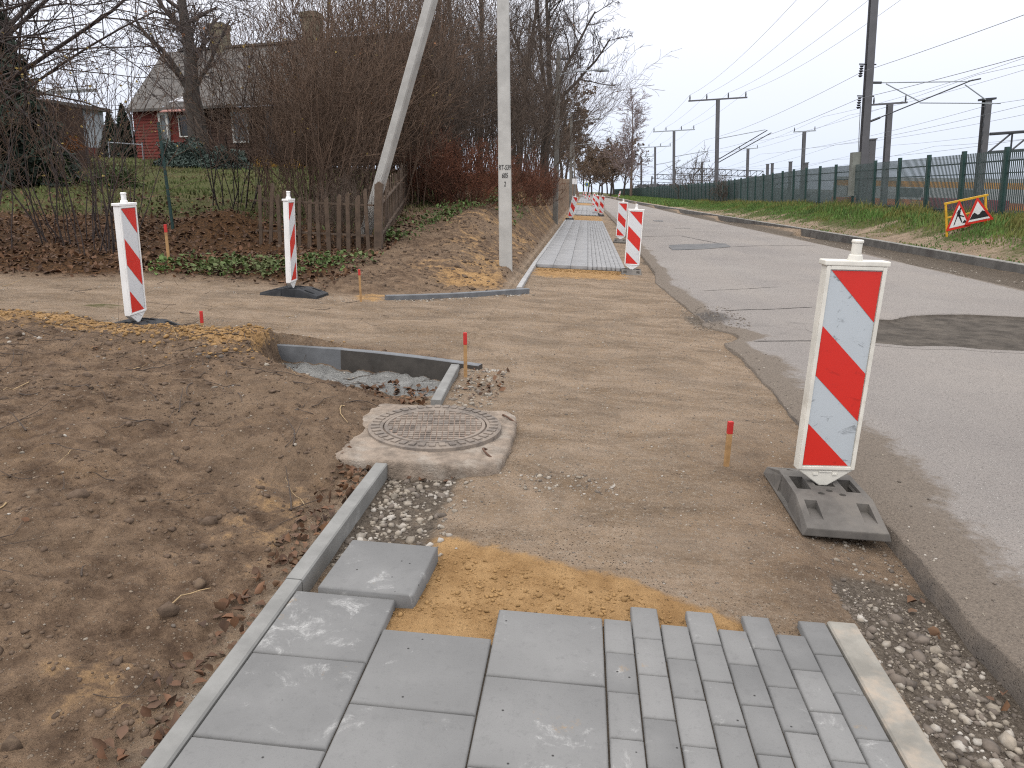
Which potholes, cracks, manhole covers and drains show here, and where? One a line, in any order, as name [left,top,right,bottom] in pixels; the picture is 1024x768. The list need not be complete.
manhole cover [368,405,502,452]
